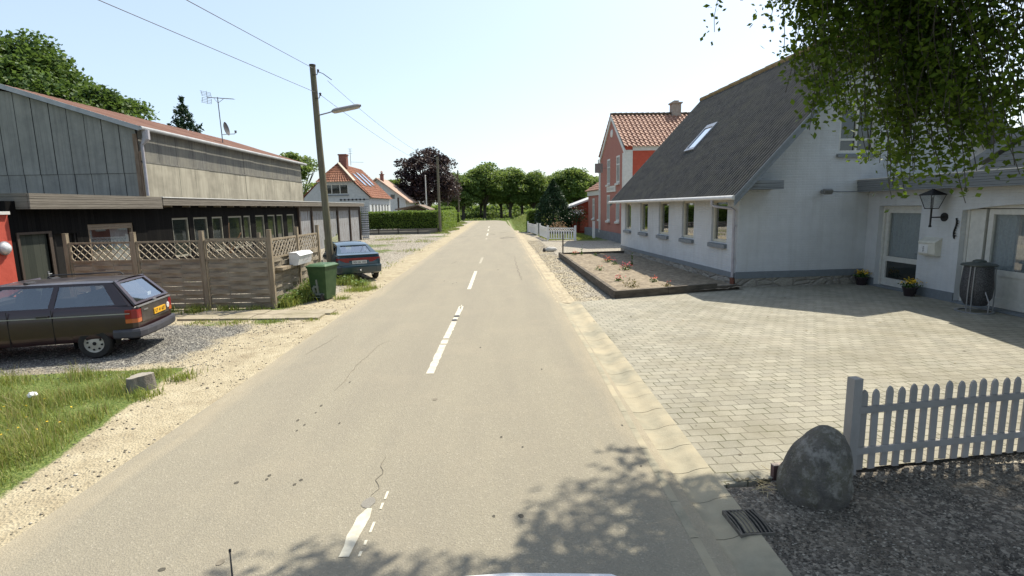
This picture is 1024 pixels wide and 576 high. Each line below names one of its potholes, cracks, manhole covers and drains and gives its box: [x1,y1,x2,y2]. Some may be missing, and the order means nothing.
drain grate [722,509,776,538]
